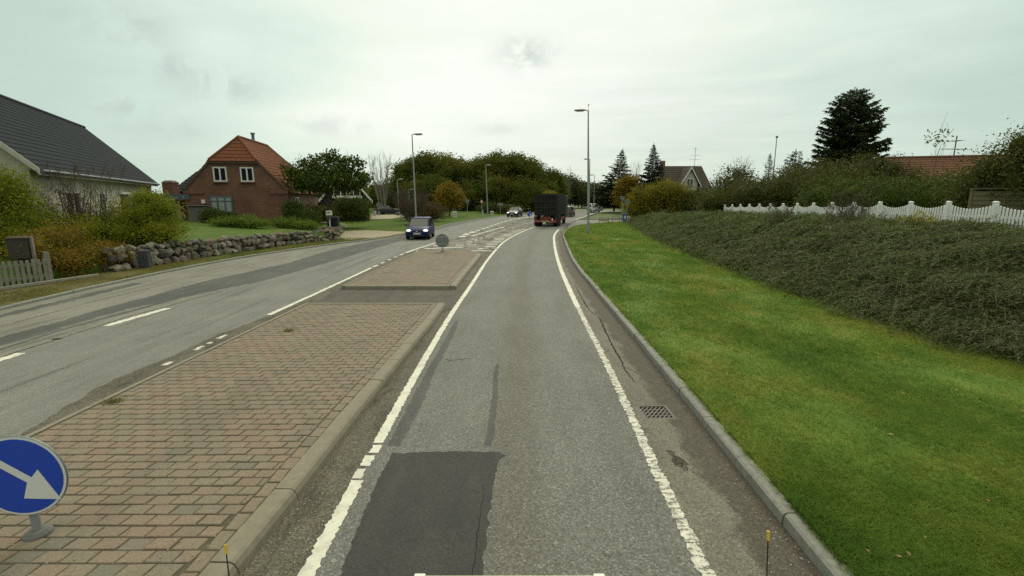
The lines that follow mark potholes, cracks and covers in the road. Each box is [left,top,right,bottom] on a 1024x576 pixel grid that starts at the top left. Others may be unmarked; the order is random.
pothole [659,450,695,473]
crack [575,285,636,382]
drain grate [635,405,677,419]
